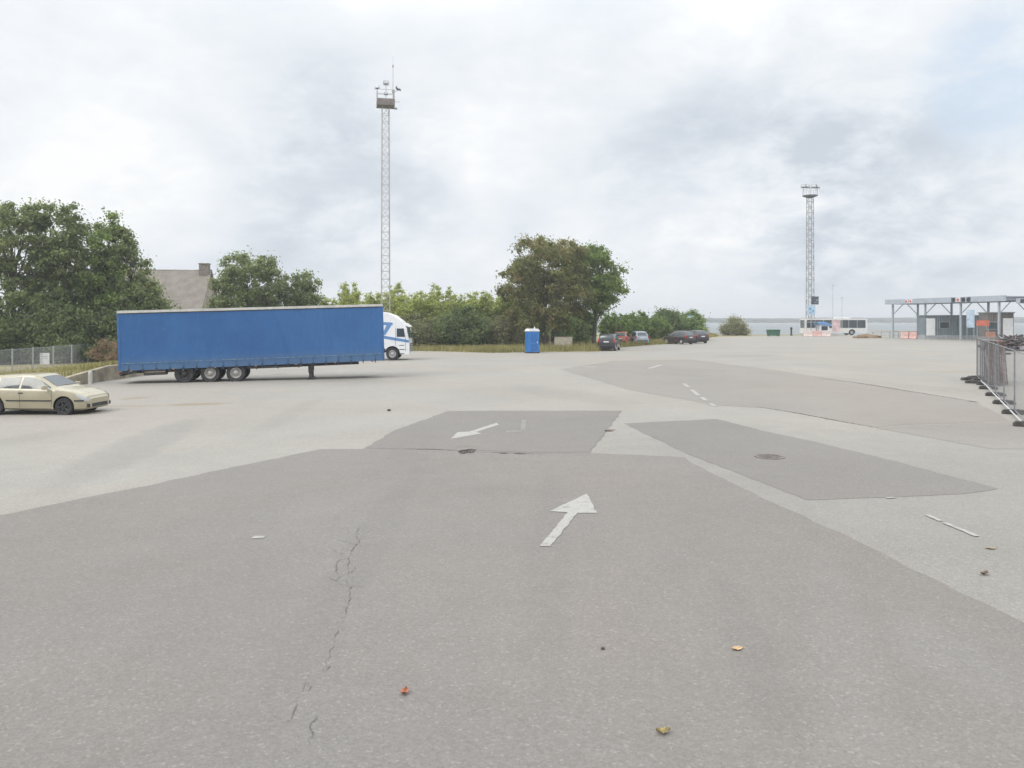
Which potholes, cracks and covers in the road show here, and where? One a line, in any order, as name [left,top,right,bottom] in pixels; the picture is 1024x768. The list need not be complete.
crack [287,539,360,743]
